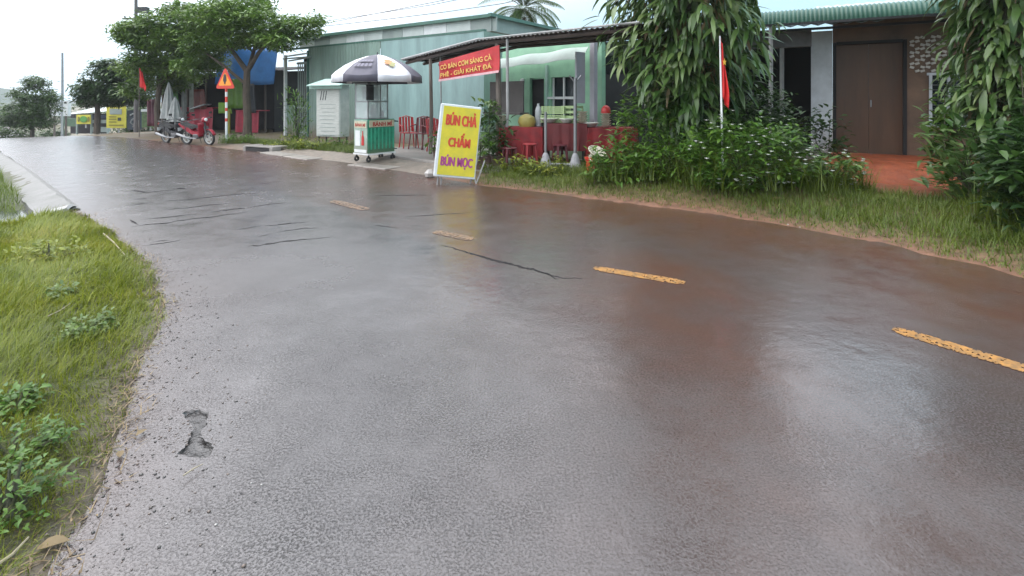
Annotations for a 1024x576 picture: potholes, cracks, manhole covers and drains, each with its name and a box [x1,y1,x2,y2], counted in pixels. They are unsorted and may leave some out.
crack [441,245,582,280]
crack [126,188,328,247]
pothole [177,410,214,458]
